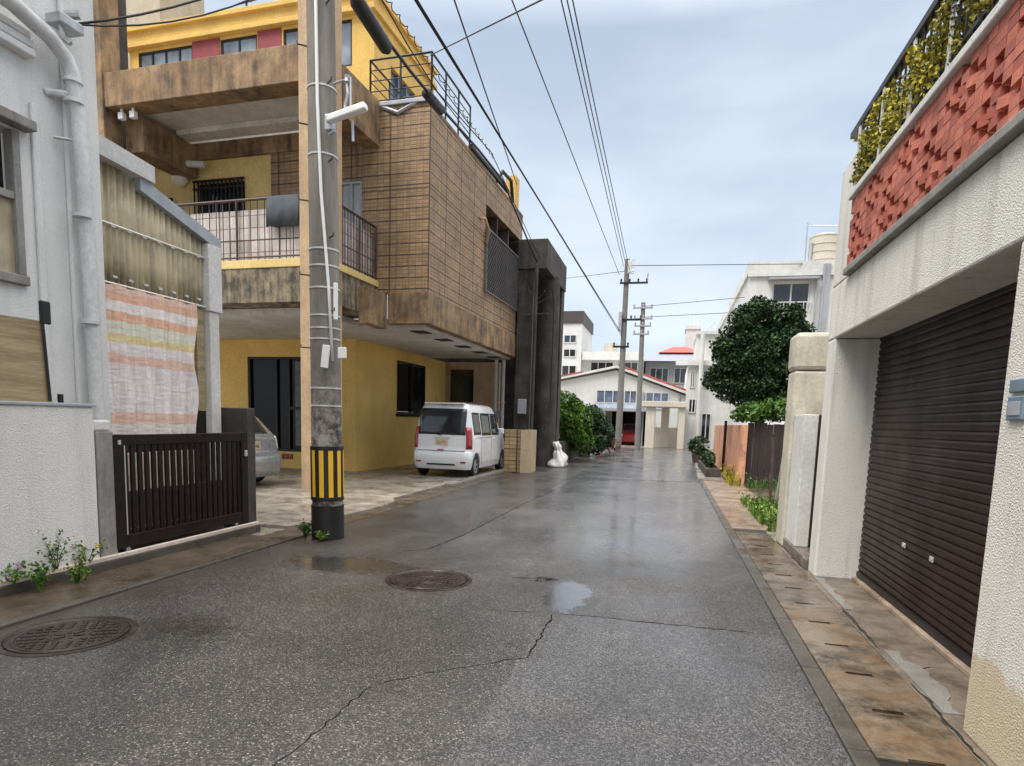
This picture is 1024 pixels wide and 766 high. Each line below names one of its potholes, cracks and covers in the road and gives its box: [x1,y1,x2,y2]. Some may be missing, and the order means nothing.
manhole cover [385,569,472,591]
crack [273,609,755,766]
manhole cover [0,616,139,657]
